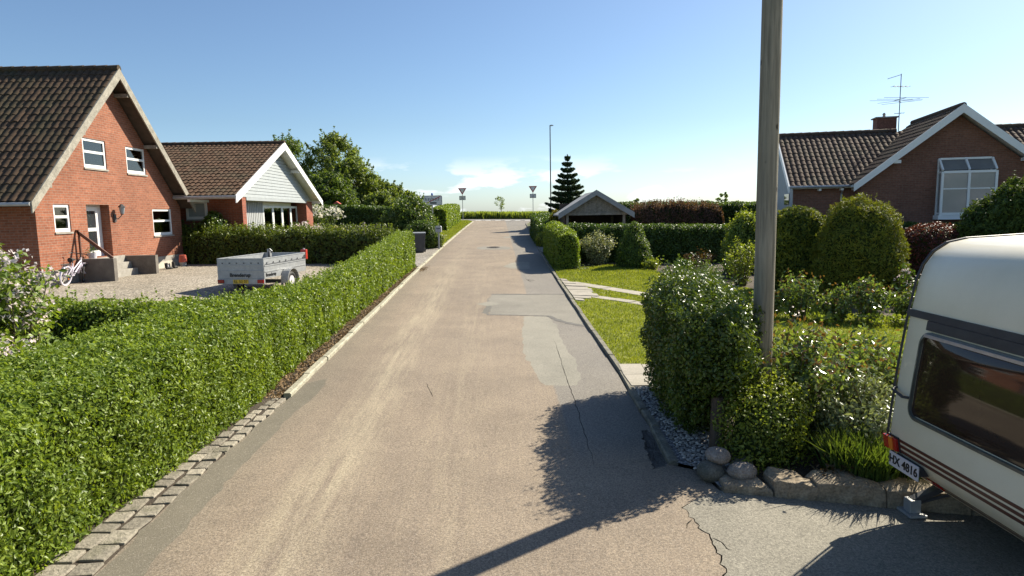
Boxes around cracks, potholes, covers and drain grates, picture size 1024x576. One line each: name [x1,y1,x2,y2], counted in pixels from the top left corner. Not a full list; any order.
crack [554,341,594,464]
crack [686,511,729,576]
